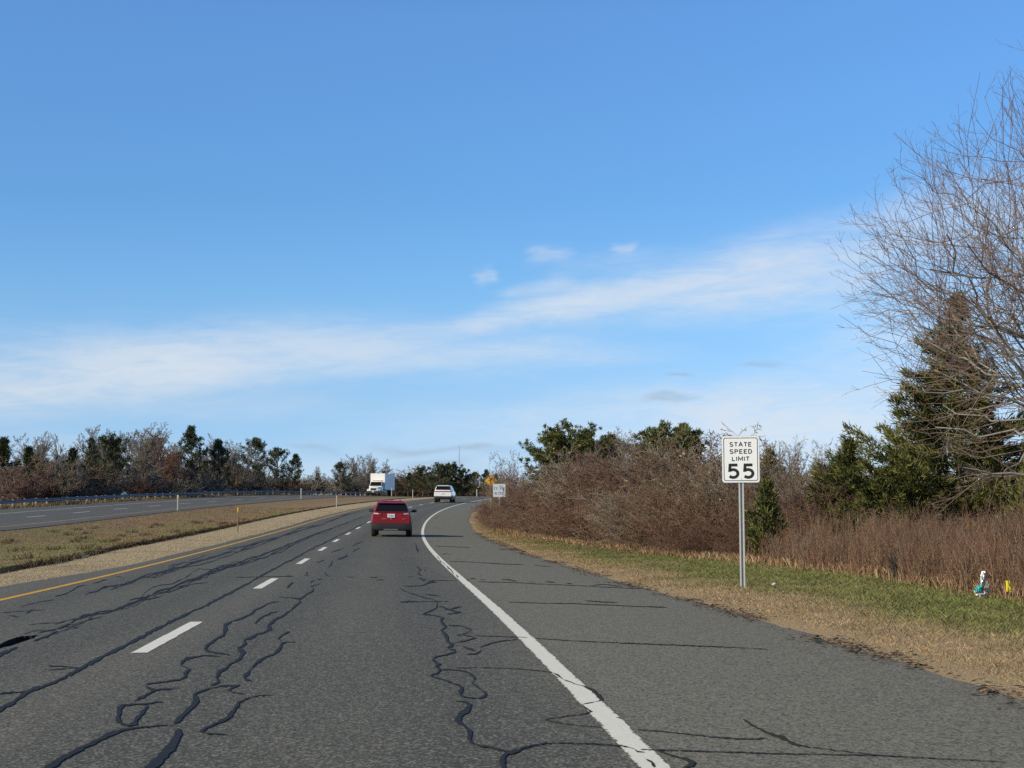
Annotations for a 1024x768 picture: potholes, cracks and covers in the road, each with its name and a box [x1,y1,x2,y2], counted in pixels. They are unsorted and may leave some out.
crack [2,511,358,617]
crack [263,542,382,588]
pothole [0,635,38,648]
crack [402,517,763,727]
crack [623,718,1003,768]
